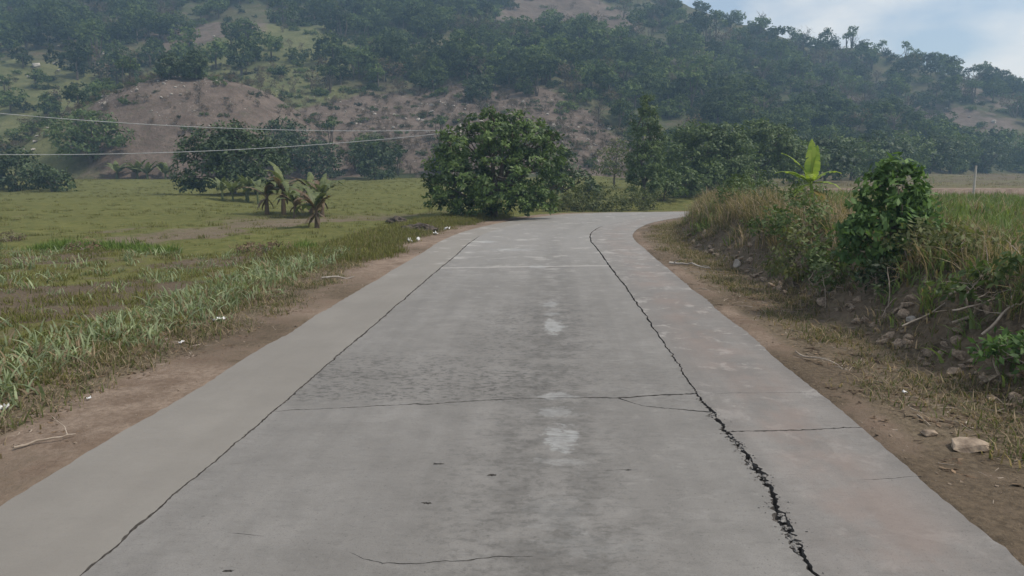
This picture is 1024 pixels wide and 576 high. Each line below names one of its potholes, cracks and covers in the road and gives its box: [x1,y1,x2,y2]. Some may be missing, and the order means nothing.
crack [80,226,862,576]
